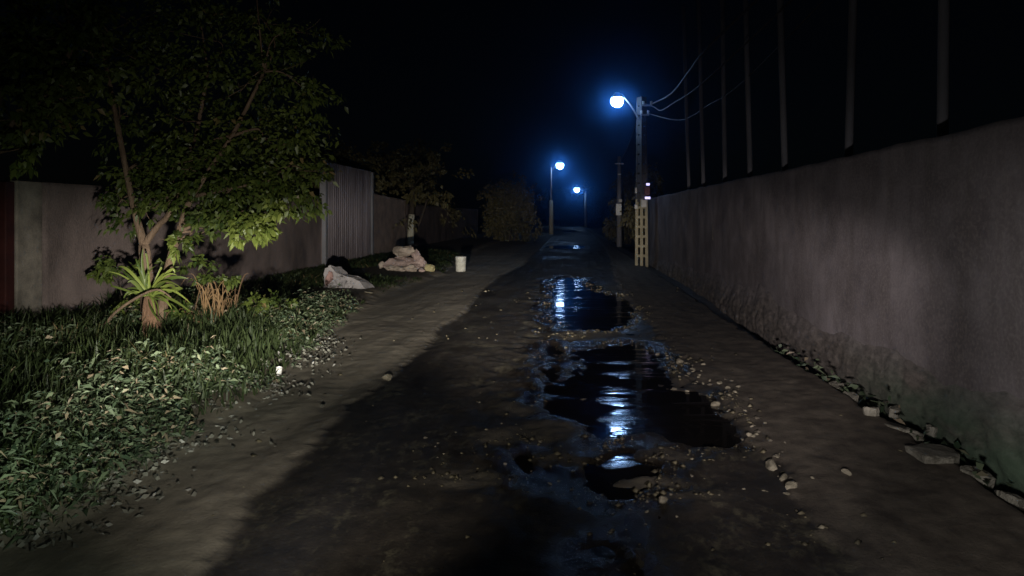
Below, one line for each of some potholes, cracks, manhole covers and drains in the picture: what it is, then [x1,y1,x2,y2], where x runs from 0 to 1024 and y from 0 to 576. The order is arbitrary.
pothole [569,447,665,502]
pothole [532,340,750,453]
pothole [505,451,552,485]
pothole [541,275,639,331]
